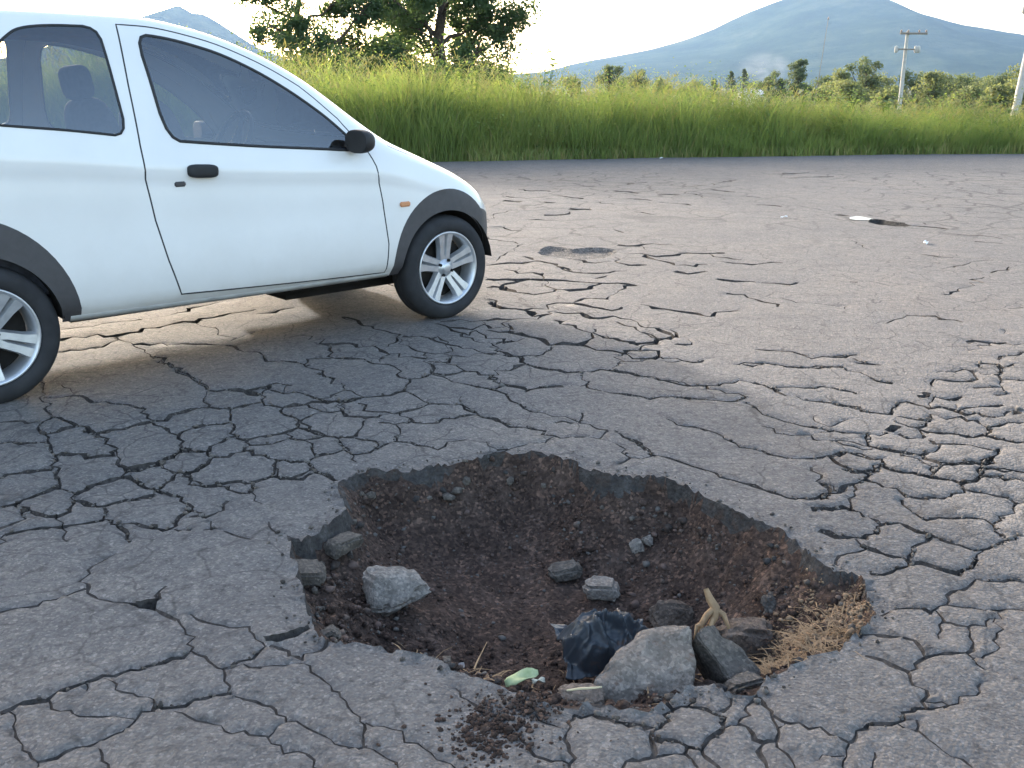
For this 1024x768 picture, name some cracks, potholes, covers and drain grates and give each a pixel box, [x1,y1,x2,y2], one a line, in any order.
crack [0,173,1024,768]
pothole [868,219,912,227]
pothole [290,450,876,712]
